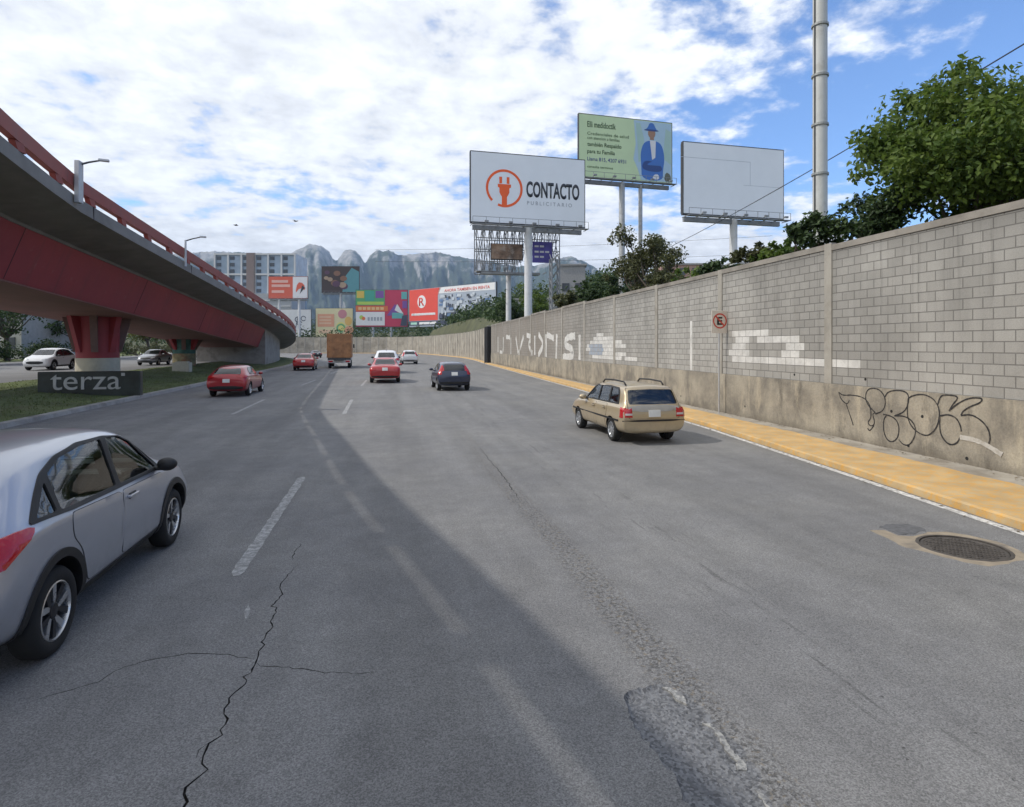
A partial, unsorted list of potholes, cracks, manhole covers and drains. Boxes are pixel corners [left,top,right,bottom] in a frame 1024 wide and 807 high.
manhole cover [870,530,1024,566]
pothole [624,682,776,807]
crack [33,545,368,807]
